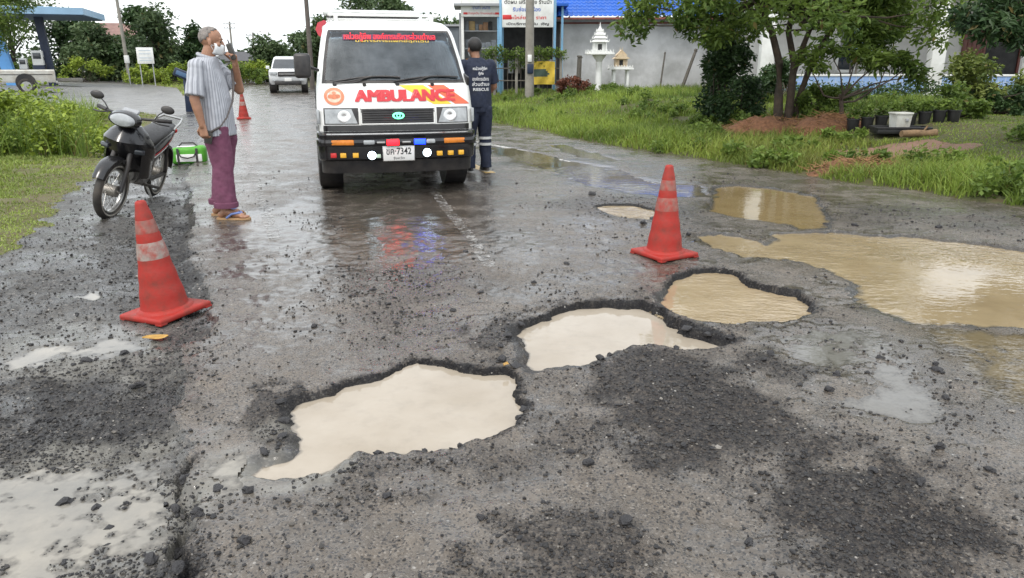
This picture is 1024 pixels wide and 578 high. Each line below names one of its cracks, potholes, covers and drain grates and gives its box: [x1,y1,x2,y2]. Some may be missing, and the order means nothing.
pothole [691,229,1024,330]
pothole [238,358,532,482]
pothole [650,268,818,325]
pothole [503,299,742,375]
pothole [705,184,836,233]
crack [165,458,199,578]
pothole [594,203,655,220]
